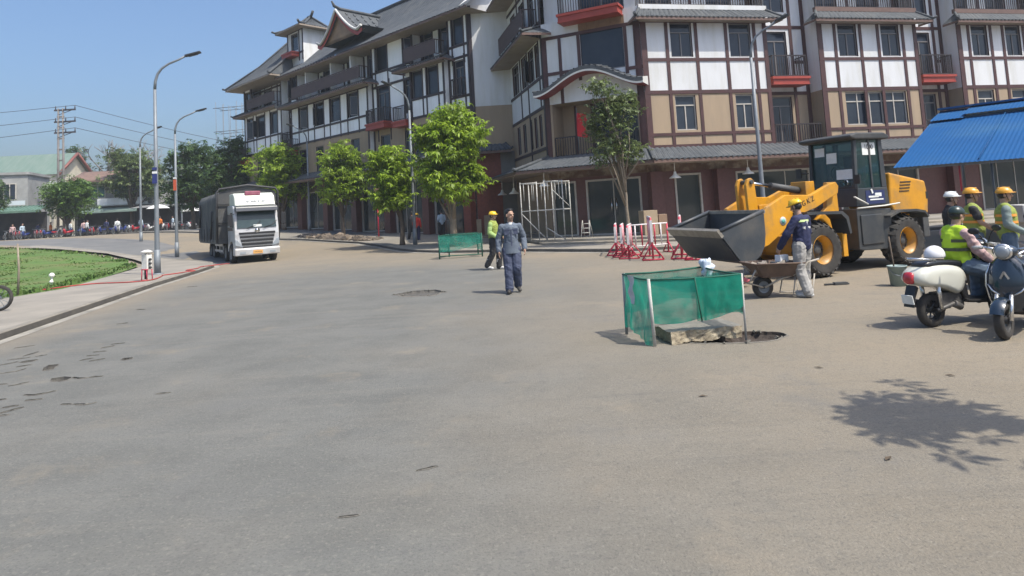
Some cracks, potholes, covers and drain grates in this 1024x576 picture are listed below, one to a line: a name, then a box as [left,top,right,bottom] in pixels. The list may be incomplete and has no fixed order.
pothole [685,330,789,344]
pothole [393,289,447,297]
